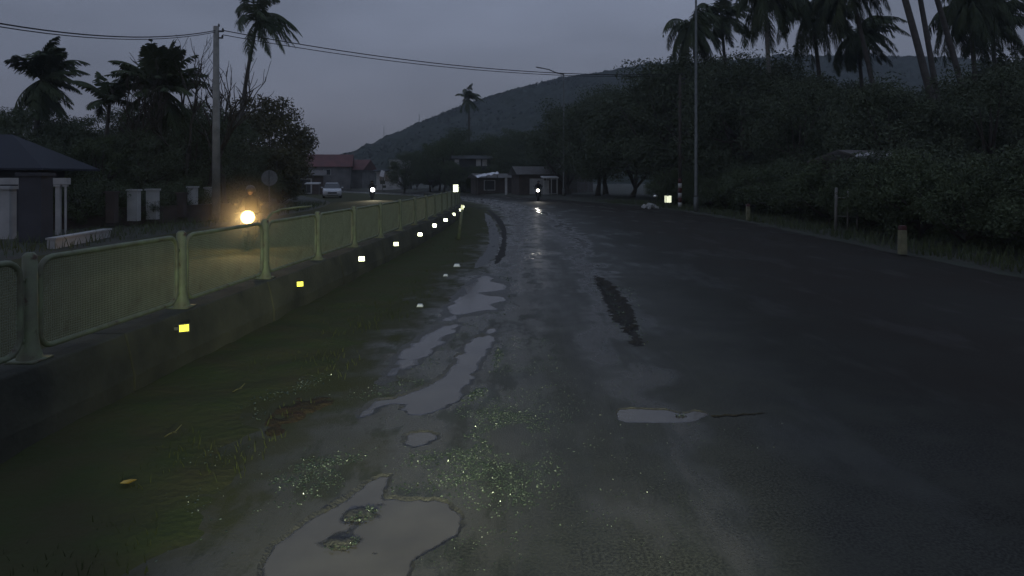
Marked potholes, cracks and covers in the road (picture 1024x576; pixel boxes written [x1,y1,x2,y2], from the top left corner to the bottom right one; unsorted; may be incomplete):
pothole [438,272,512,322]
pothole [615,407,709,423]
pothole [354,324,500,419]
pothole [256,473,467,576]
pothole [399,430,441,448]
